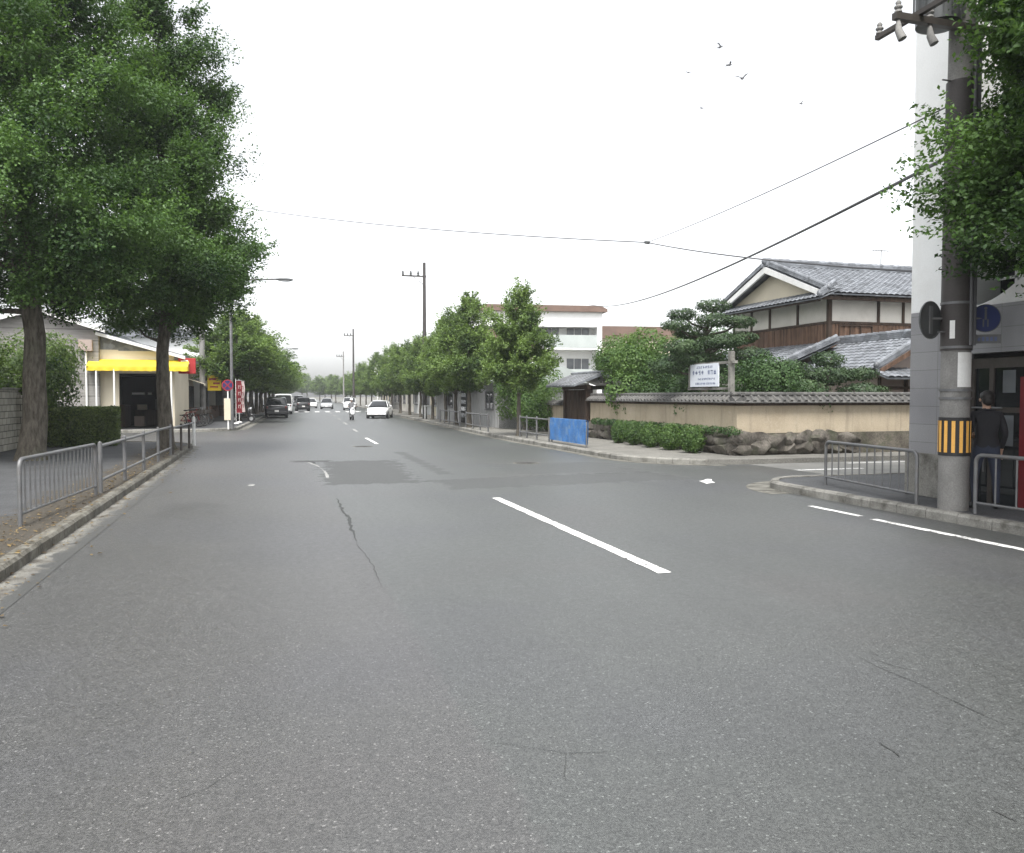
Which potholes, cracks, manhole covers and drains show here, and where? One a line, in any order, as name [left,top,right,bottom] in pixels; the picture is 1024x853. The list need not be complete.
crack [497,742,617,778]
crack [856,653,1004,724]
crack [336,498,381,584]
